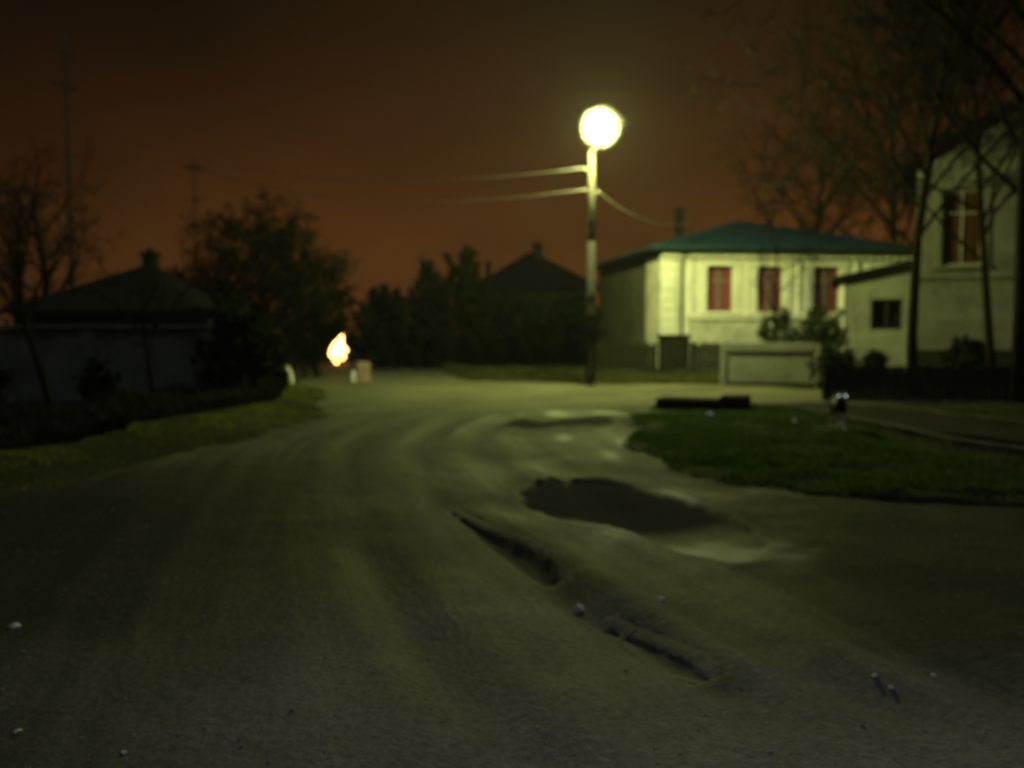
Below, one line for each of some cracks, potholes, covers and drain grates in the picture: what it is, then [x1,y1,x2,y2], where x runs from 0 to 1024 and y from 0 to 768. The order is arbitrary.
pothole [510,474,781,569]
pothole [484,416,622,430]
